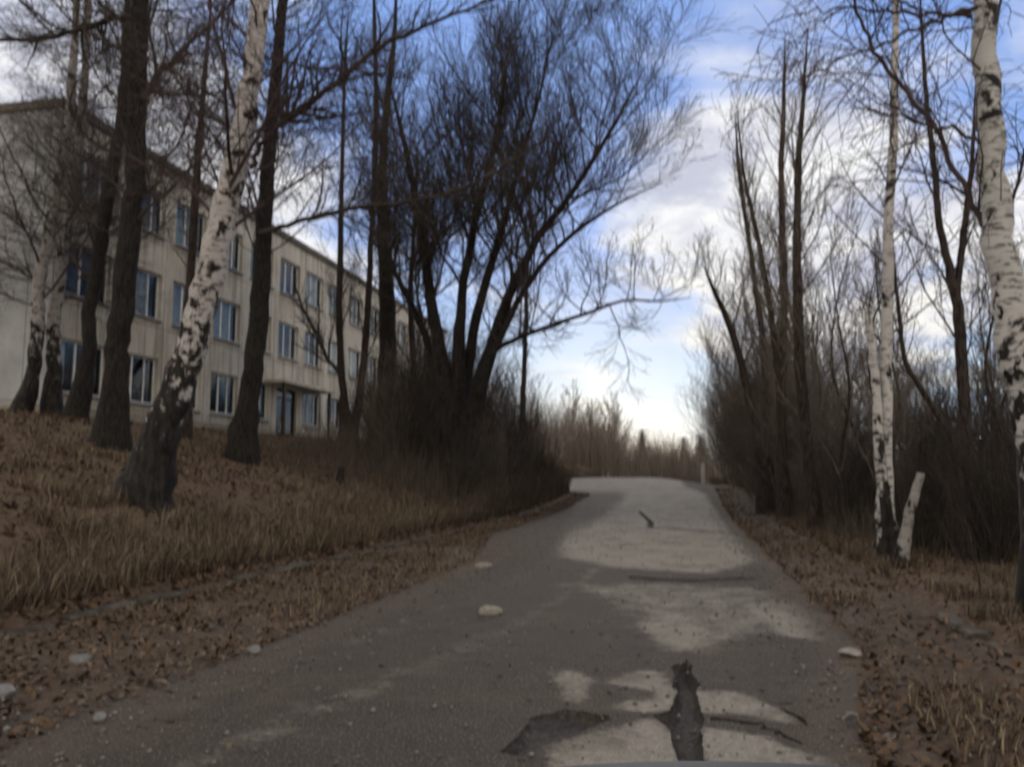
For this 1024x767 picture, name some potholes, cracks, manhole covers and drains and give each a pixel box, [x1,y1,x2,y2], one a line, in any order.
pothole [499,709,611,757]
crack [710,709,809,744]
pothole [653,660,705,761]
crack [639,511,731,534]
